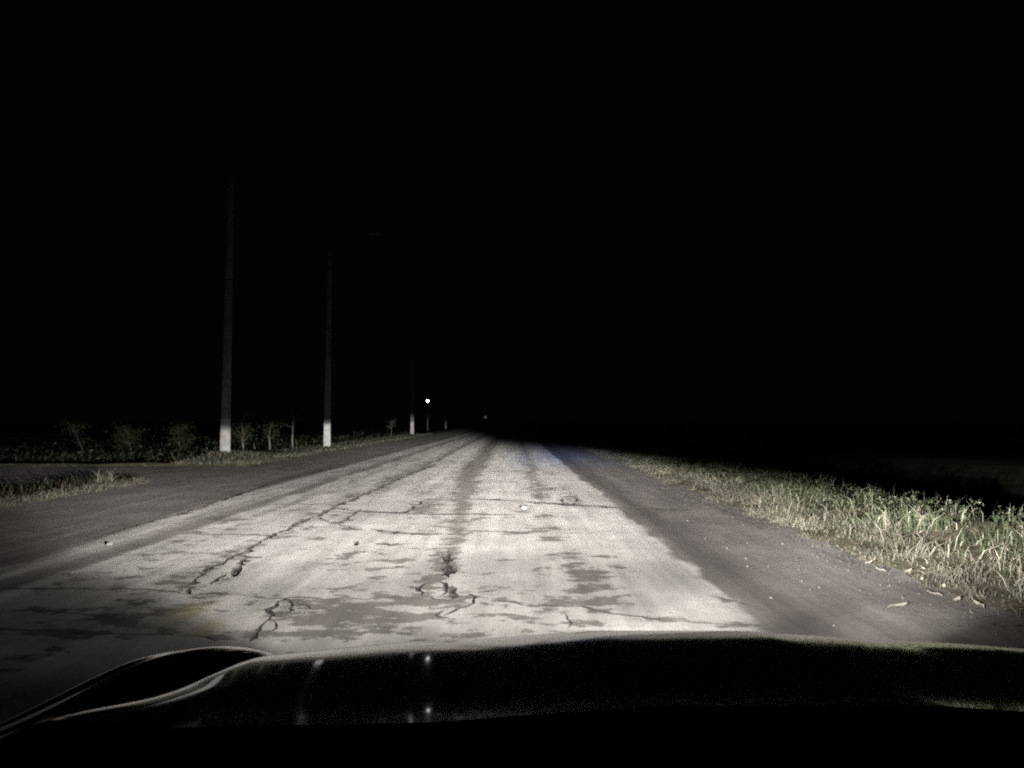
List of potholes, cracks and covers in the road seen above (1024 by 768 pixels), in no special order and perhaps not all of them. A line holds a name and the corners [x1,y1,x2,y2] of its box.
crack [4,464,761,641]
pothole [448,585,460,599]
pothole [438,550,459,578]
